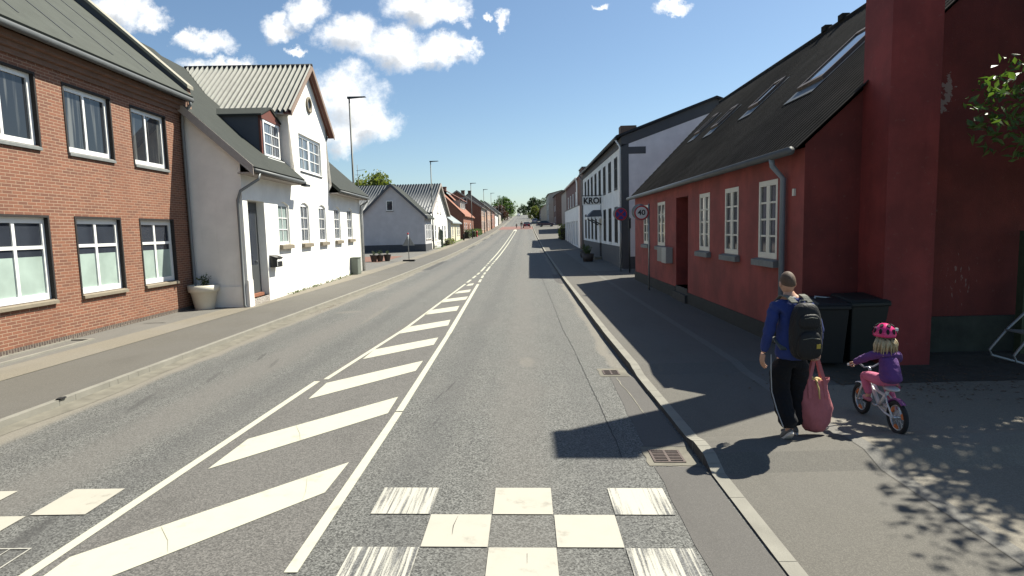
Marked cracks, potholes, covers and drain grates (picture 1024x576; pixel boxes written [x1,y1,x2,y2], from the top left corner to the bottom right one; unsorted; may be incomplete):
drain grate [648,450,686,463]
